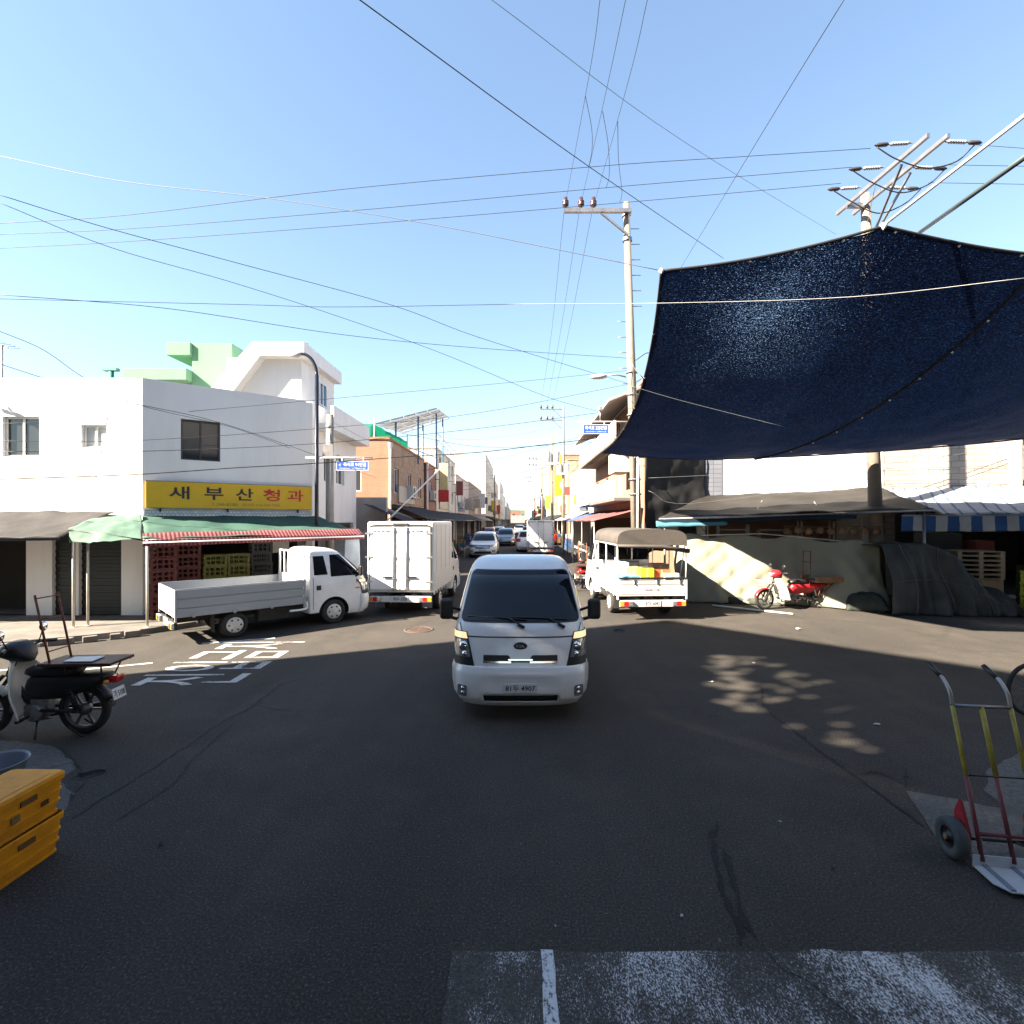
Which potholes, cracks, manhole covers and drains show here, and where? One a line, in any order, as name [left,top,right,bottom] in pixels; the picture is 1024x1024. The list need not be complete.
crack [112,724,238,822]
crack [709,821,756,946]
pothole [70,769,109,779]
